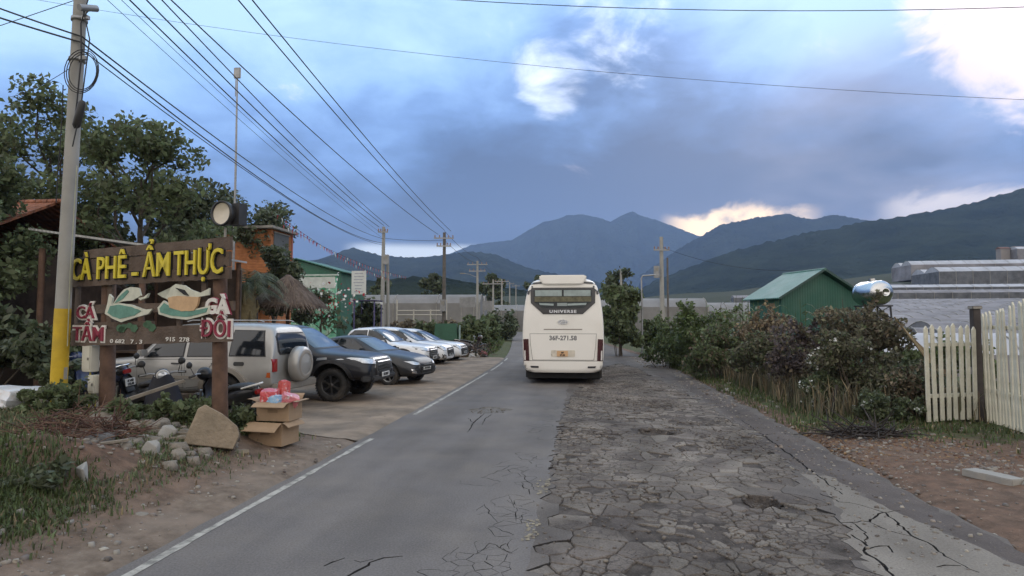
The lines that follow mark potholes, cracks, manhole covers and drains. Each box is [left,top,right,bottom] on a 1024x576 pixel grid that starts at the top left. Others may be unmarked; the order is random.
pothole [637,428,672,438]
pothole [741,494,781,510]
crack [515,363,904,576]
